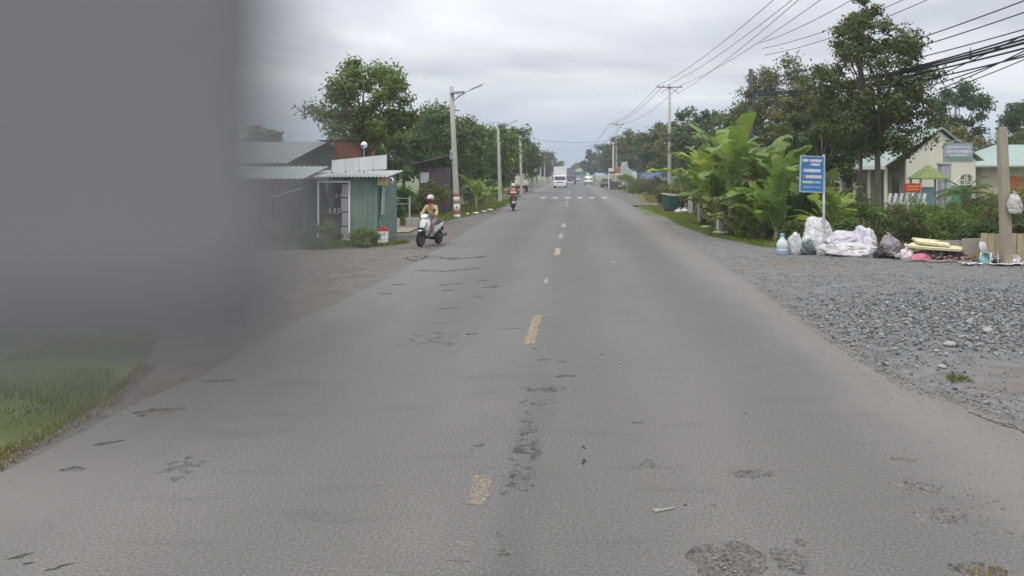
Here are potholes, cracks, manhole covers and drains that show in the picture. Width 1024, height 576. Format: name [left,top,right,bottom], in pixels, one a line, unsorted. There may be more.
crack [5,553,77,571]
crack [381,256,500,310]
pothole [769,547,809,575]
pothole [684,540,769,576]
pothole [945,562,1013,576]
